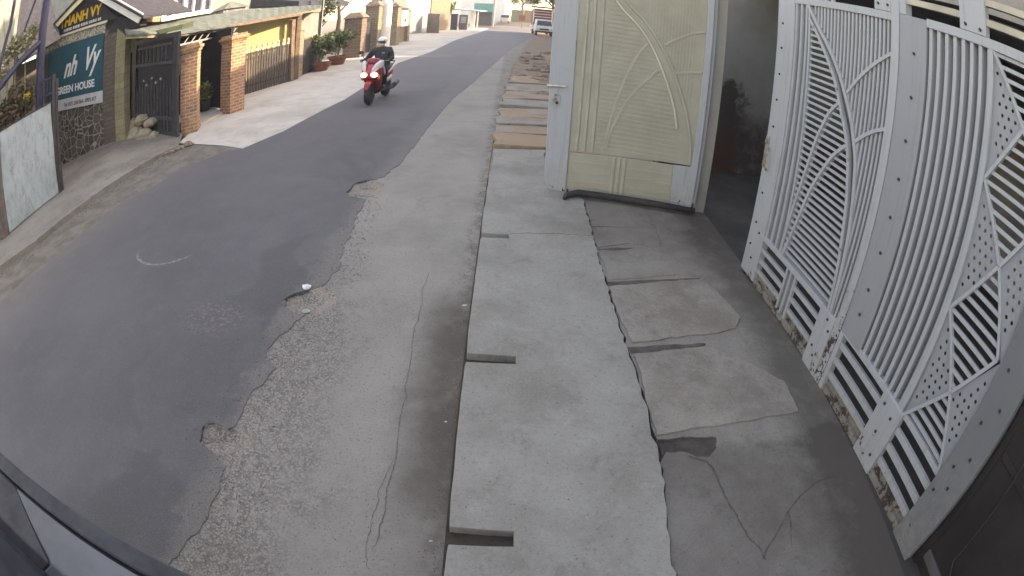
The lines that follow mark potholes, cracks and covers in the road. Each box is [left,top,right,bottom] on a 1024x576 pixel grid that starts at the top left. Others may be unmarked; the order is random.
crack [689,455,834,559]
crack [365,274,429,566]
pothole [201,424,251,457]
